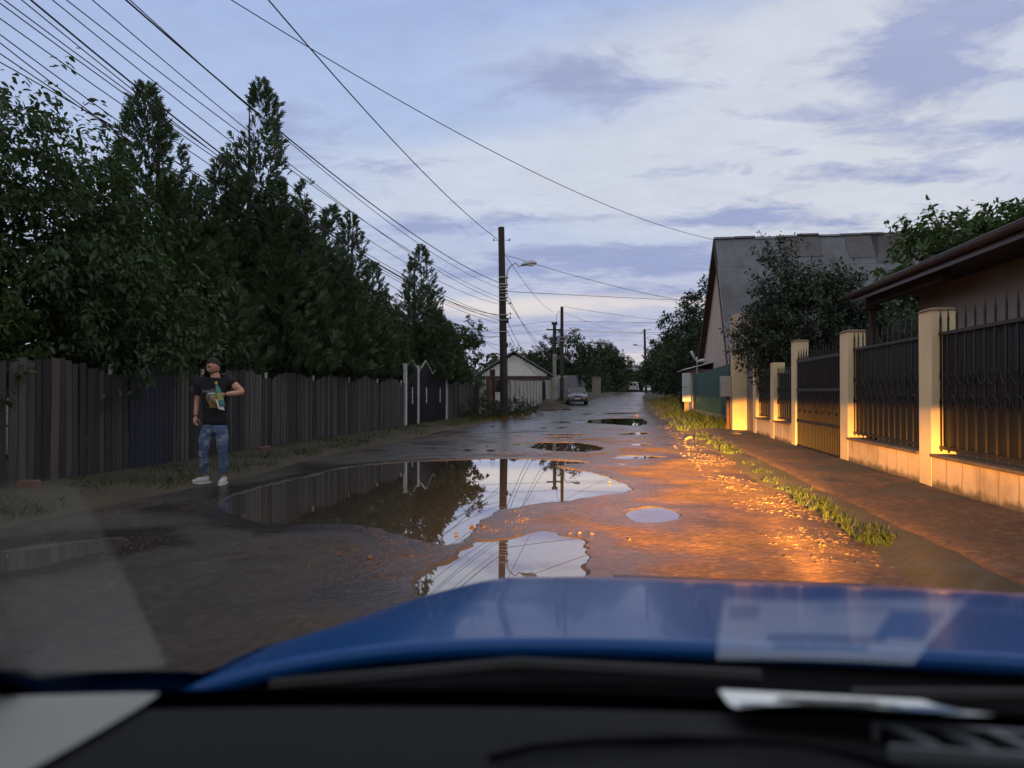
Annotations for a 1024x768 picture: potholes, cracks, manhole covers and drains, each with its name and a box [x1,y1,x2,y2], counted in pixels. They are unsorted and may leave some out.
pothole [217,458,634,545]
pothole [0,537,131,572]
pothole [410,531,591,598]
pothole [623,506,682,523]
pothole [513,442,606,452]
pothole [550,418,648,426]
